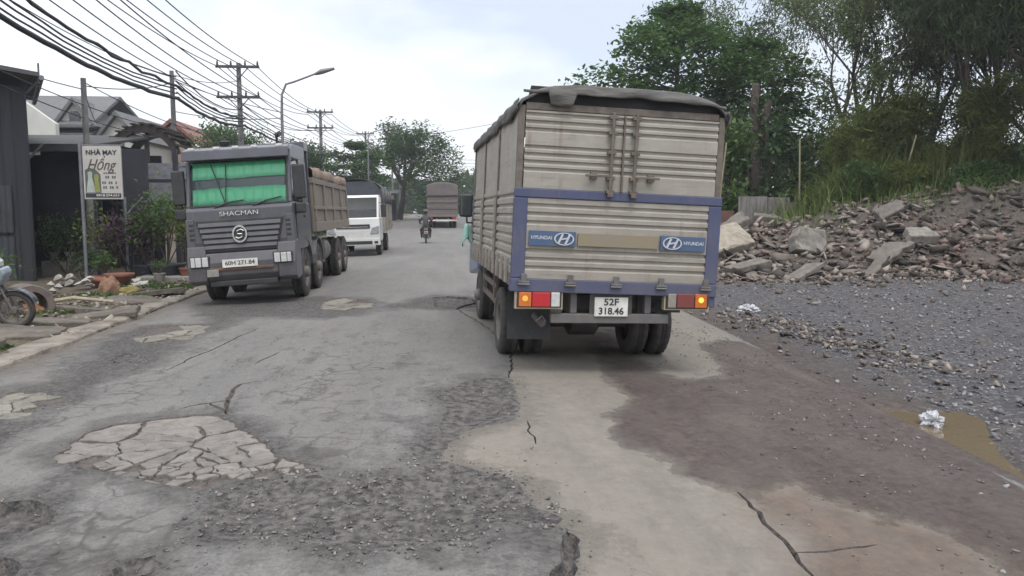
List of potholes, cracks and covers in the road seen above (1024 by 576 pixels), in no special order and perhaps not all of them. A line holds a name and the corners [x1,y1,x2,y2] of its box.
crack [0,324,316,490]
pothole [432,296,476,310]
pothole [539,528,592,576]
pothole [0,551,32,576]
pothole [0,495,63,544]
crack [456,303,495,335]
